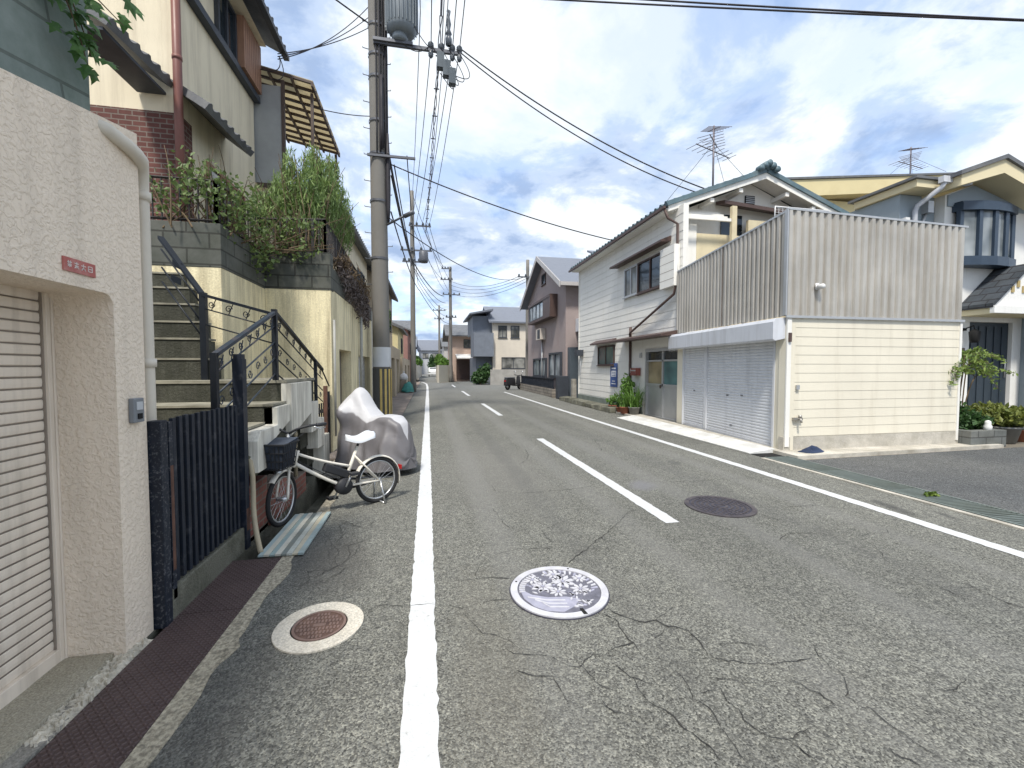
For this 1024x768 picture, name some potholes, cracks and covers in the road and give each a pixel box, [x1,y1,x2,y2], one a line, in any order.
drain grate [817,469,914,490]
drain grate [886,487,1020,517]
drain grate [765,456,840,471]
manhole cover [509,566,610,620]
drain grate [988,513,1024,527]
manhole cover [684,495,757,518]
crack [304,517,375,584]
crack [454,599,941,765]
manhole cover [272,602,364,654]
